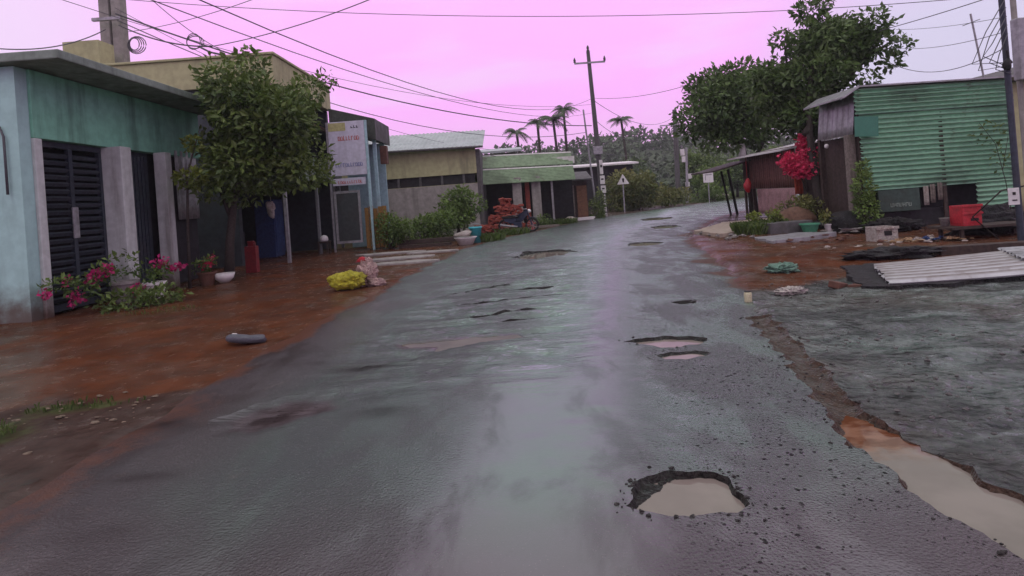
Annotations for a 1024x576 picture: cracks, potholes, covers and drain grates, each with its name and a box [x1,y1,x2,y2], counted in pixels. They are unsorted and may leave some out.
pothole [614,465,768,524]
pothole [513,249,577,259]
pothole [625,334,707,352]
pothole [740,312,1024,559]
pothole [657,350,711,359]
